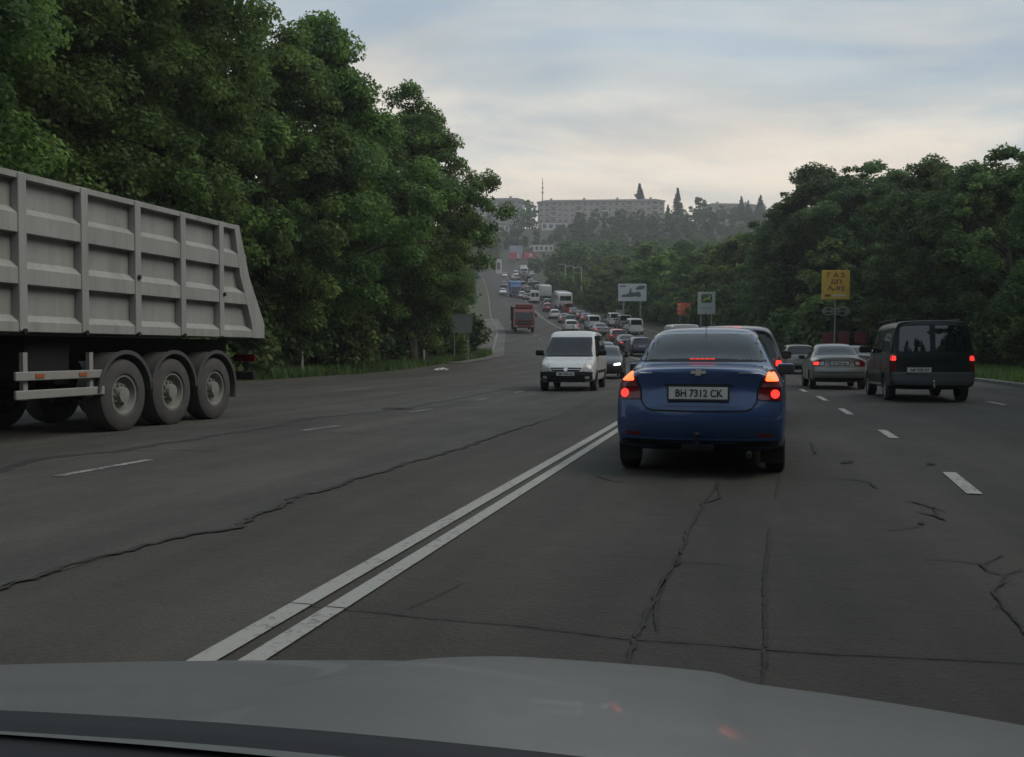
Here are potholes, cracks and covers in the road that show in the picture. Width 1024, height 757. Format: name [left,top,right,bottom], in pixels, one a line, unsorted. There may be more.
crack [0,419,549,589]
crack [280,473,1024,685]
